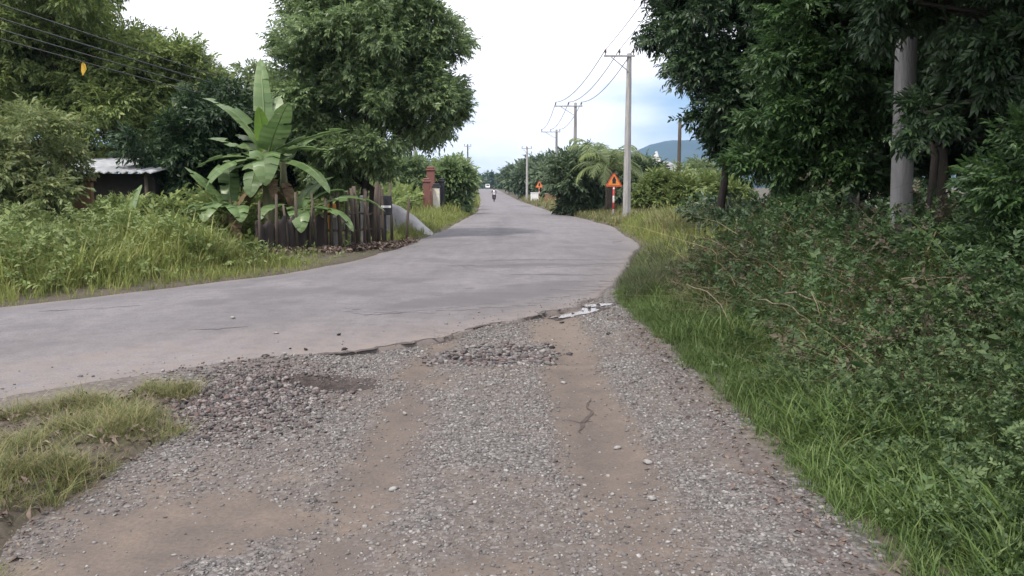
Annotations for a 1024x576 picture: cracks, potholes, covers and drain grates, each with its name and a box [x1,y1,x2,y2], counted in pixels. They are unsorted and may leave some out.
pothole [244,373,384,392]
pothole [424,343,562,366]
crack [570,399,594,434]
